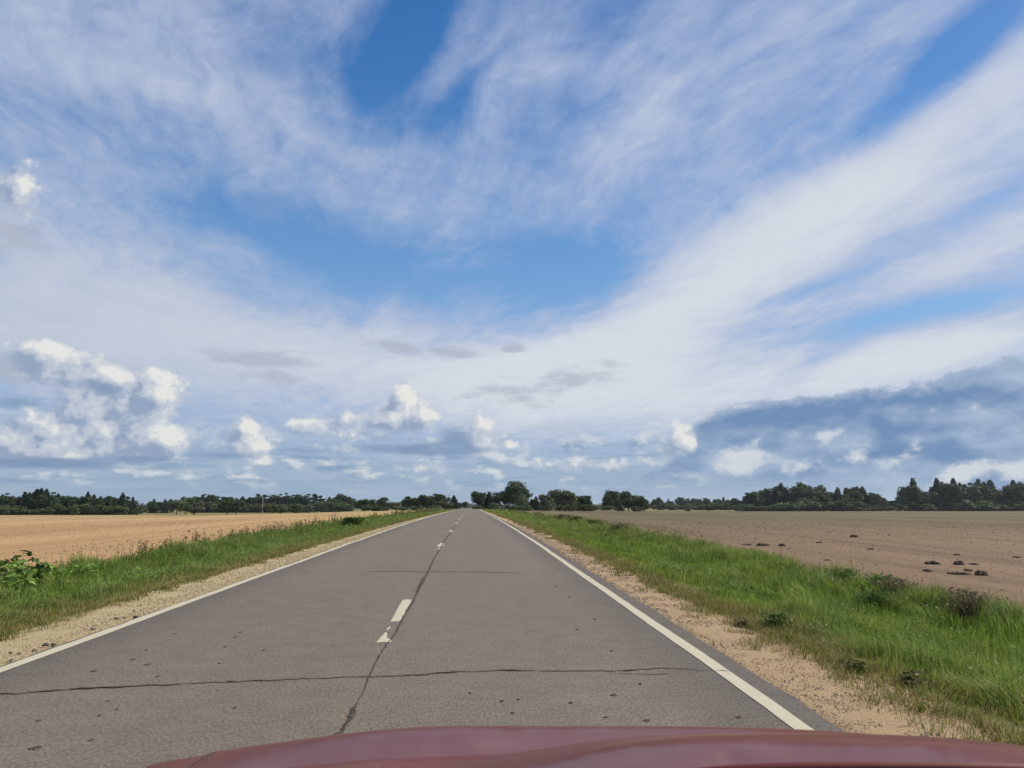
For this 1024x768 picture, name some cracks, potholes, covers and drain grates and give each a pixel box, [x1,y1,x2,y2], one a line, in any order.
crack [0,667,731,694]
crack [334,704,357,735]
